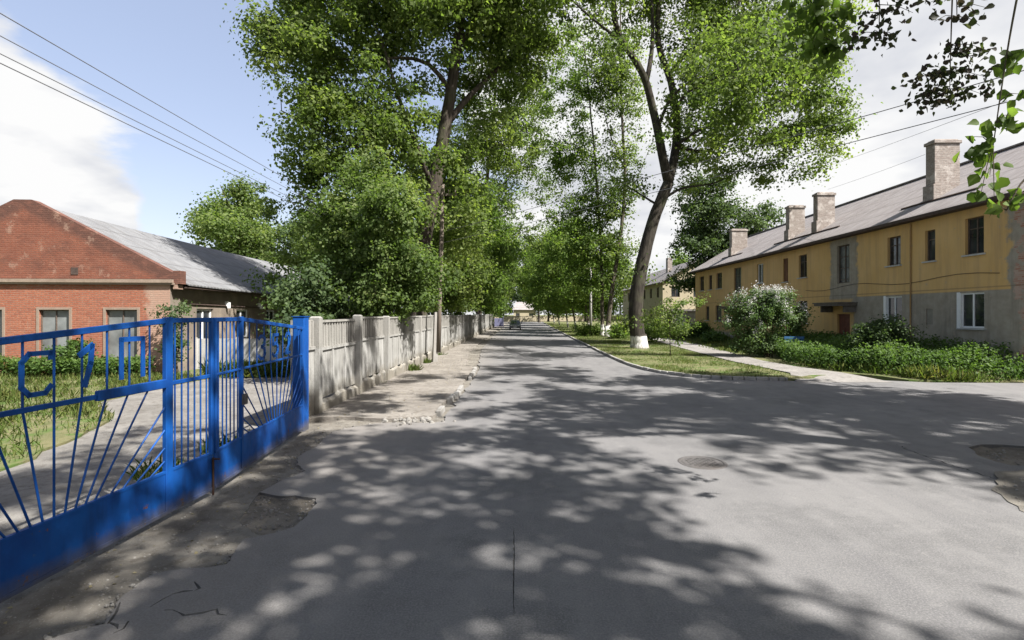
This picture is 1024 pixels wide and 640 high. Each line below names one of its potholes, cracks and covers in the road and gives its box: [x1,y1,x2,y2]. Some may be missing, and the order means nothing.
crack [107,582,225,633]
manhole cover [677,456,728,470]
pothole [969,444,1024,466]
pothole [239,492,317,535]
